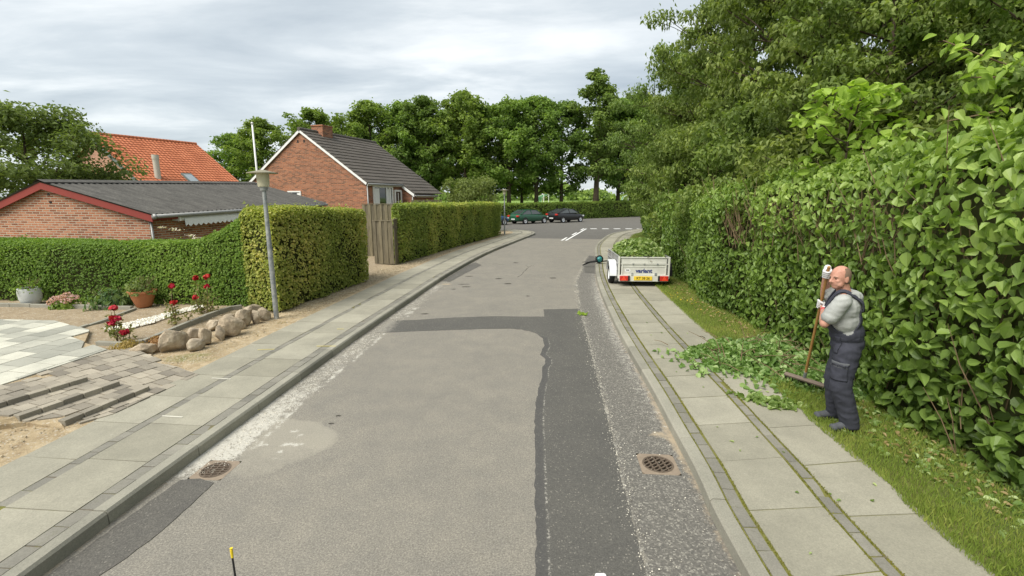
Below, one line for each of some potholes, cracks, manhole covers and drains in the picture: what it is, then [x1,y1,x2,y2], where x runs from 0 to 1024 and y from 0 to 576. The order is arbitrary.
drain grate [637,454,681,476]
drain grate [189,460,240,481]
